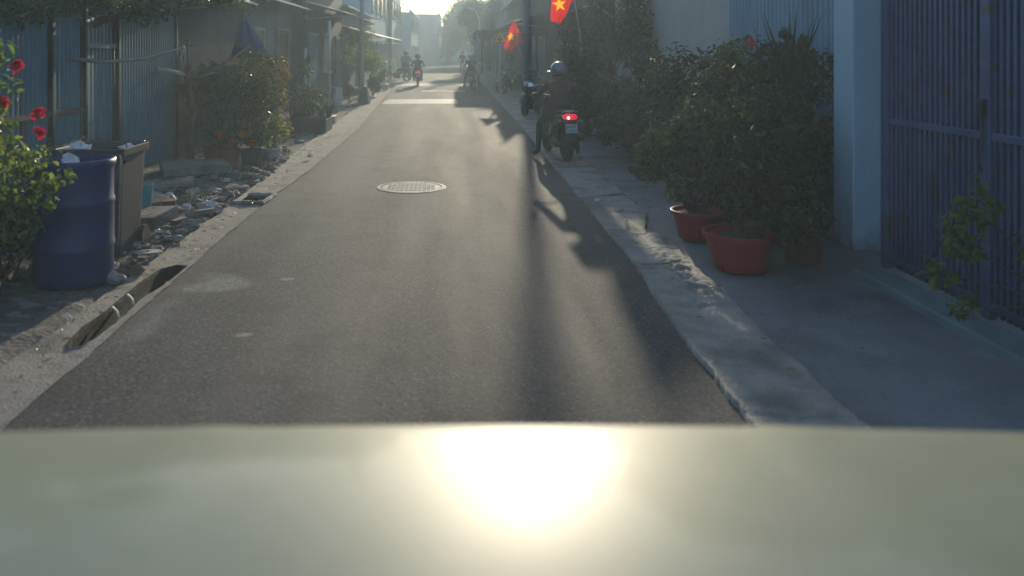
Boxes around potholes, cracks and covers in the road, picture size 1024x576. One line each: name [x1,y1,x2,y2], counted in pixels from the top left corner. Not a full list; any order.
manhole cover [376,181,446,194]
